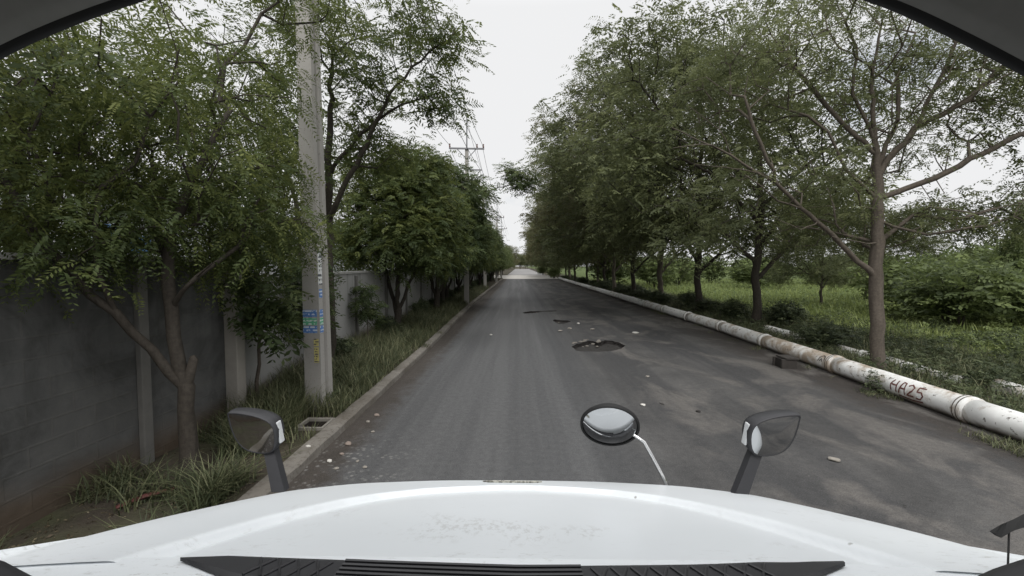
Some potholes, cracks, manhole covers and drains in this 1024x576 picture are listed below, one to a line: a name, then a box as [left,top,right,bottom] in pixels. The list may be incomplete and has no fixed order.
pothole [572,339,625,352]
